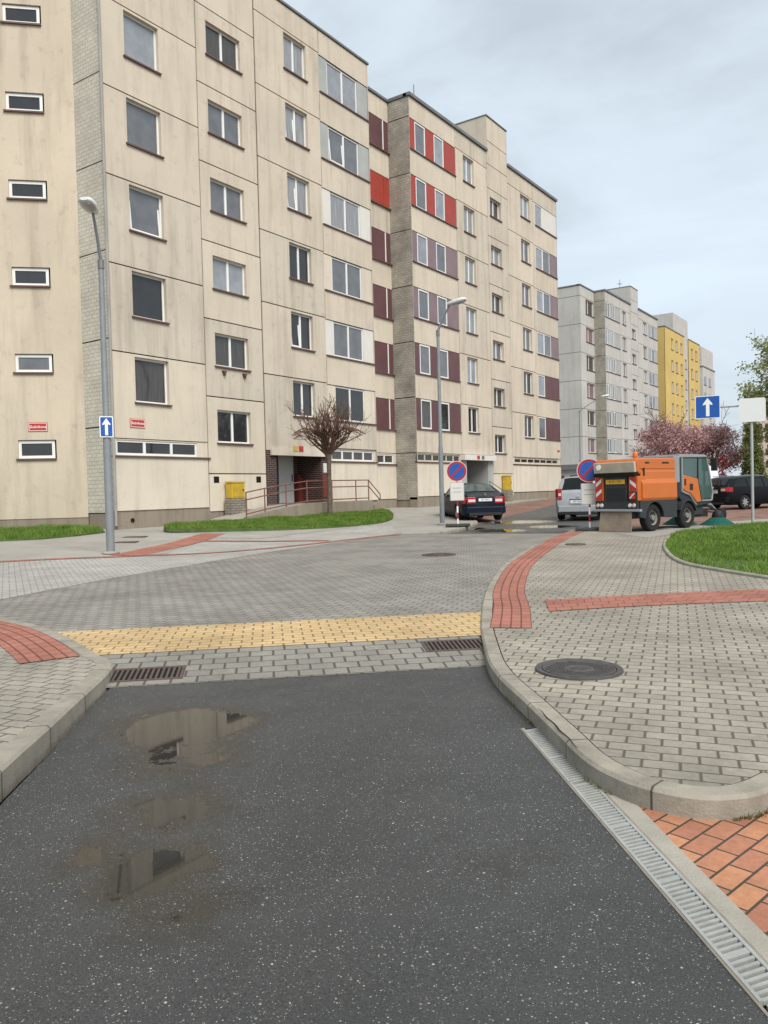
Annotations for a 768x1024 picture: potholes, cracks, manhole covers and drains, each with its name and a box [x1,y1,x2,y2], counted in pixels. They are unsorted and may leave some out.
drain grate [109,665,186,683]
manhole cover [535,658,624,681]
drain grate [420,638,483,652]
